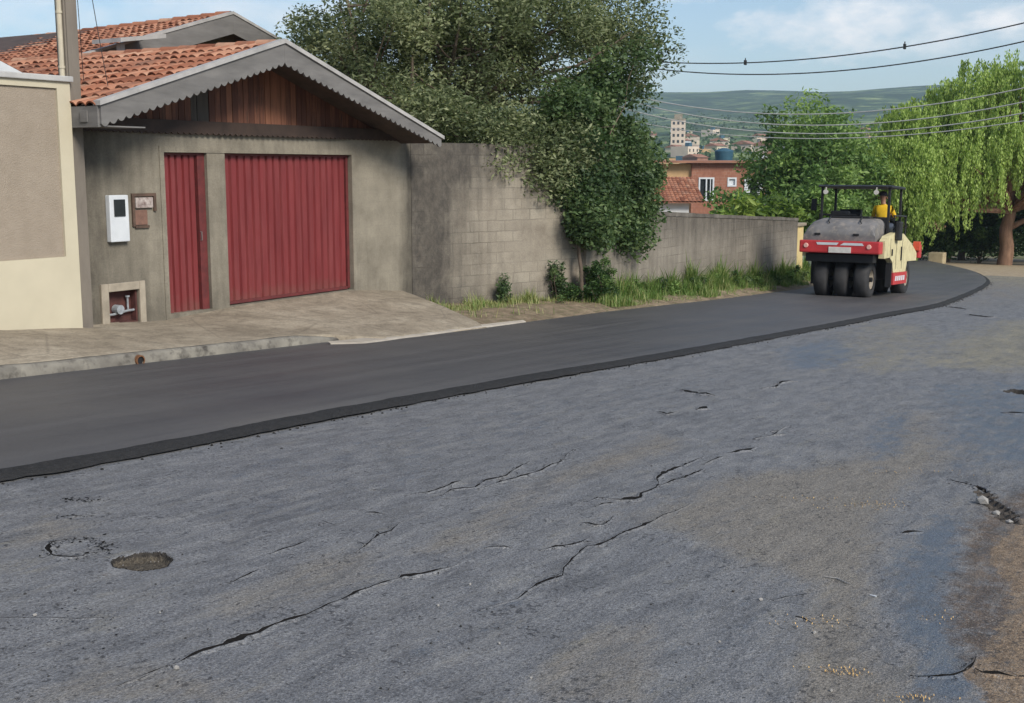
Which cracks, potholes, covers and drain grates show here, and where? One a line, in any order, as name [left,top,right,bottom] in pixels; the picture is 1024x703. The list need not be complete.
crack [909,656,1024,680]
crack [763,380,798,389]
crack [0,426,790,687]
pothole [111,551,173,571]
crack [656,390,714,416]
pothole [974,486,1023,525]
